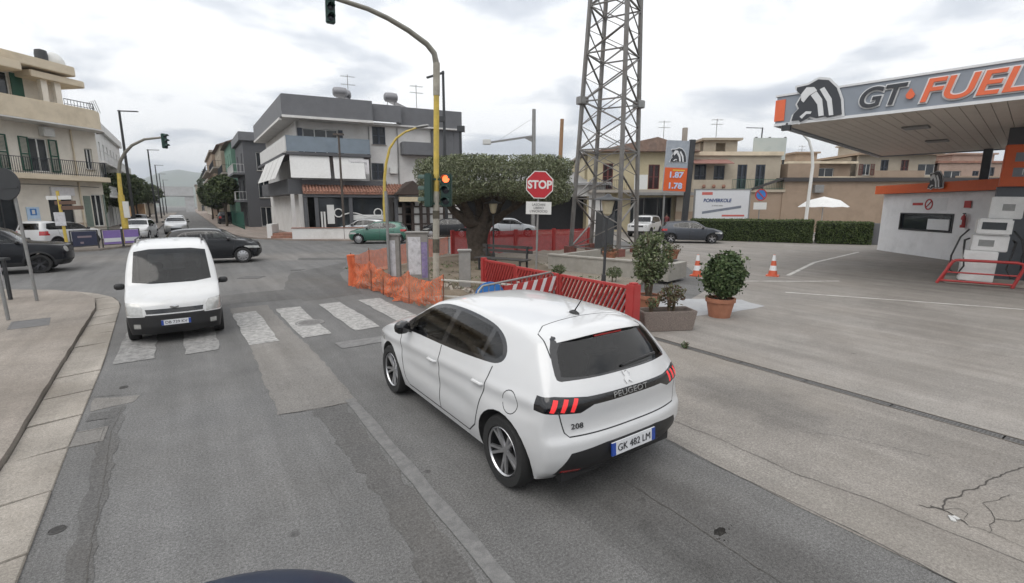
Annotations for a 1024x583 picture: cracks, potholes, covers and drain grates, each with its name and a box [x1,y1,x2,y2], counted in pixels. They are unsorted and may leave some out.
drain grate [654,336,1024,446]
crack [919,467,1024,547]
